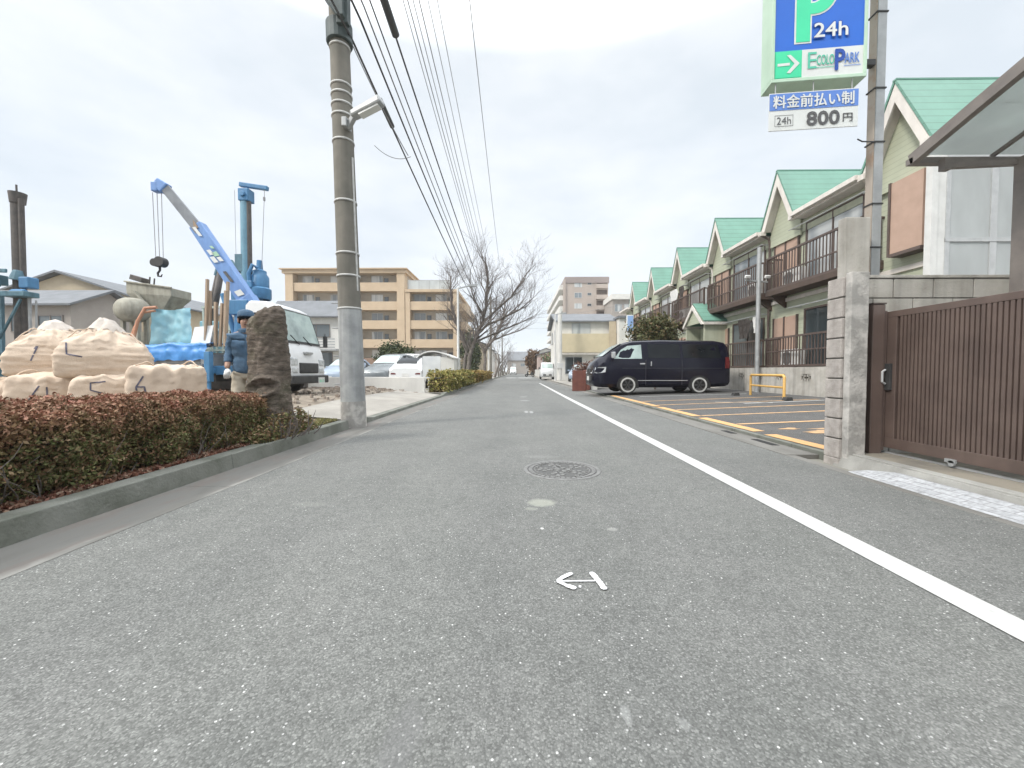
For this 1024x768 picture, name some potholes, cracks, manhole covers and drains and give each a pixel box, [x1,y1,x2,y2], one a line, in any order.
manhole cover [523,461,601,480]
